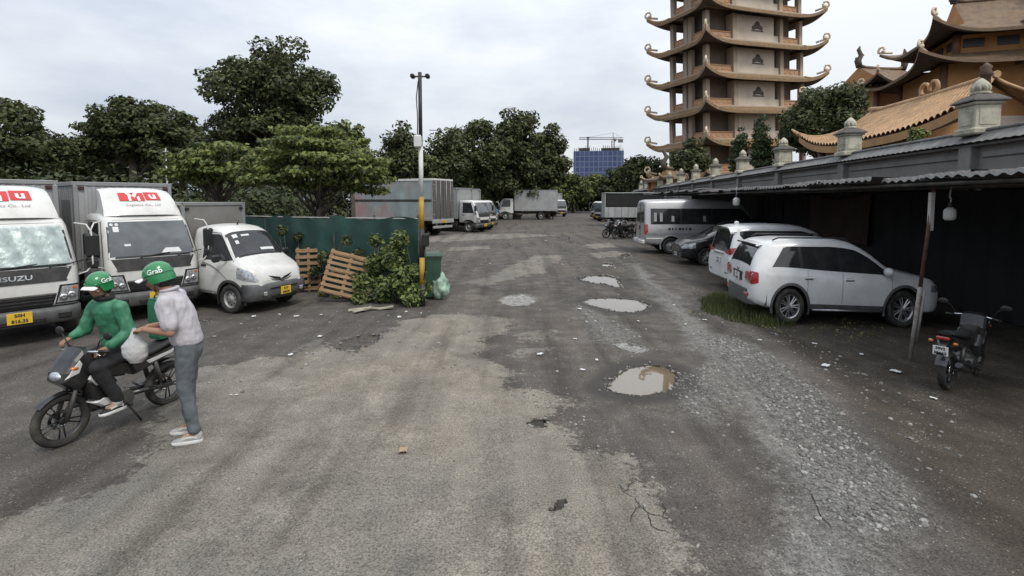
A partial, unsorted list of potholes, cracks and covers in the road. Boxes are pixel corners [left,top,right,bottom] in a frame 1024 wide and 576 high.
pothole [604,361,680,397]
pothole [526,417,549,429]
pothole [548,498,569,511]
crack [618,481,674,533]
pothole [580,297,652,313]
pothole [577,274,624,288]
pothole [333,333,383,351]
